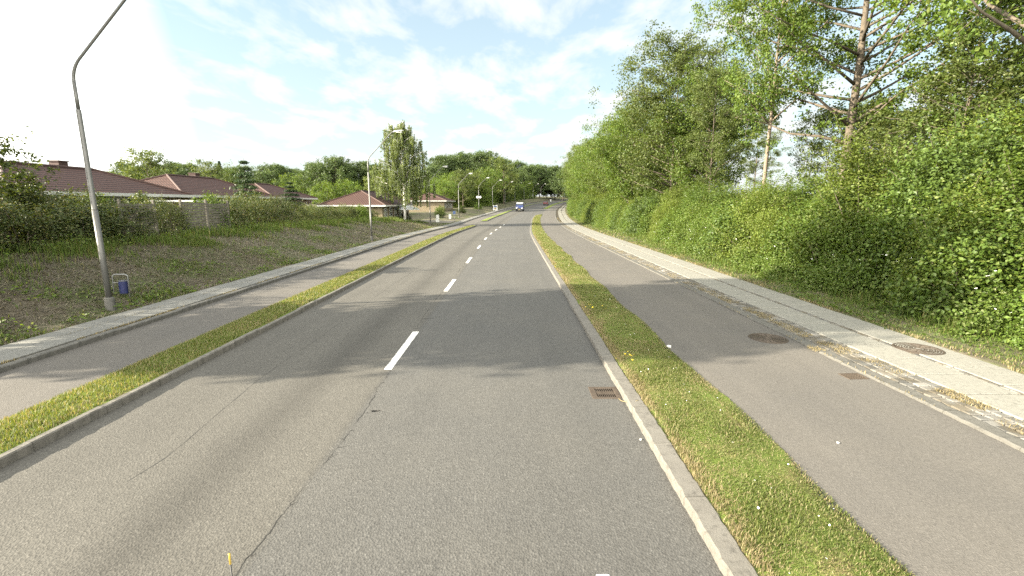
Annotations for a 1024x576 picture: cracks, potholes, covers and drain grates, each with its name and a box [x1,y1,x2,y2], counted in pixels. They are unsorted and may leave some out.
crack [235,256,471,576]
manhole cover [748,333,789,344]
crack [128,302,368,481]
manhole cover [892,342,946,355]
drain grate [588,387,622,399]
